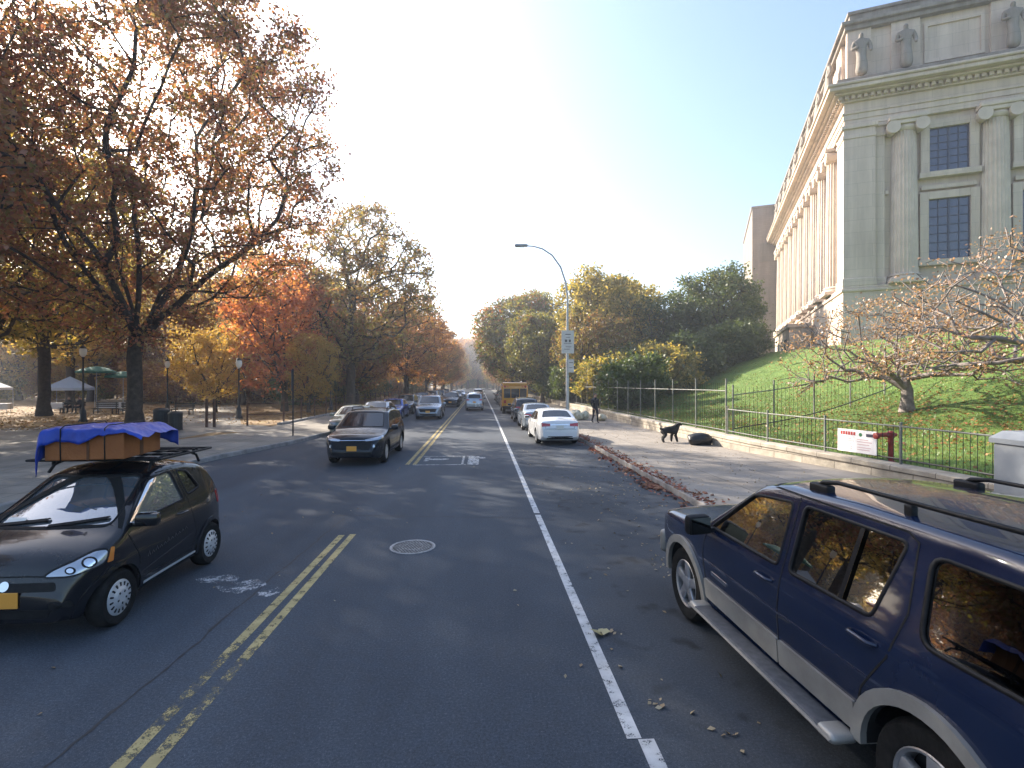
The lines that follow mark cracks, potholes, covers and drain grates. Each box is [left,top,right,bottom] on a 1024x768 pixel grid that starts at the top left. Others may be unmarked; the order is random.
manhole cover [390,540,435,554]
